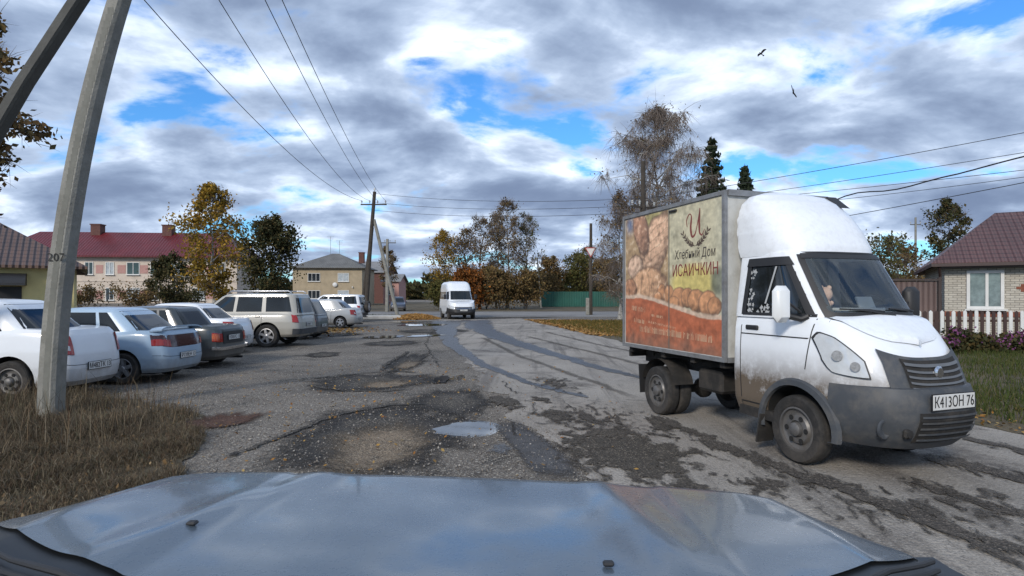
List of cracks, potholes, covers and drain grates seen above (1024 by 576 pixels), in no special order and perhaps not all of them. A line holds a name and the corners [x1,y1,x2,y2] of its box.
pothole [388,354,428,372]
pothole [311,373,450,391]
pothole [260,405,482,475]
